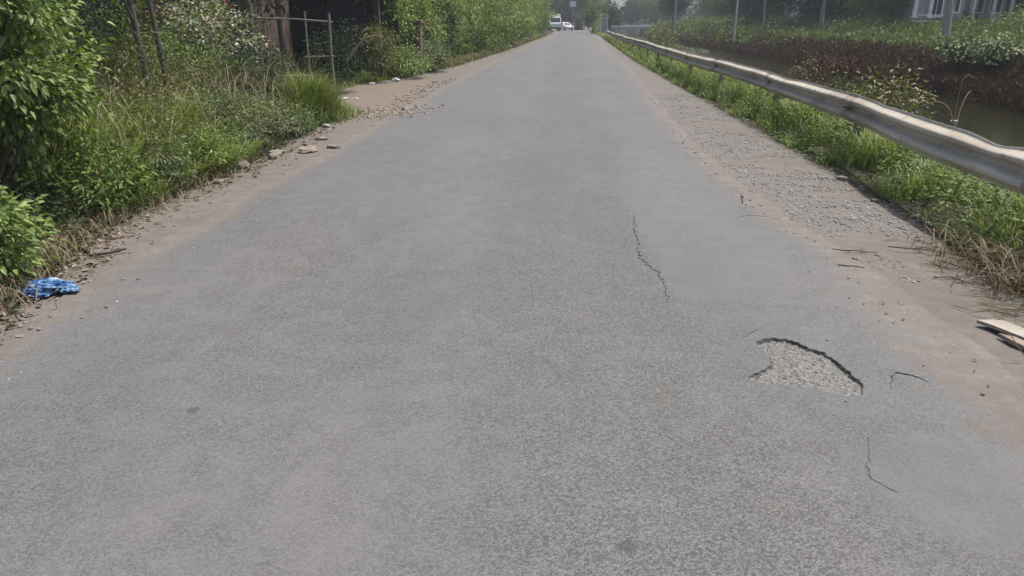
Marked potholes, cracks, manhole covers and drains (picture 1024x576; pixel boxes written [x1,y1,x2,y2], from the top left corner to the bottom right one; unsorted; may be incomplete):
crack [865,437,898,493]
pothole [738,336,879,402]
crack [633,214,669,302]
crack [890,372,928,388]
